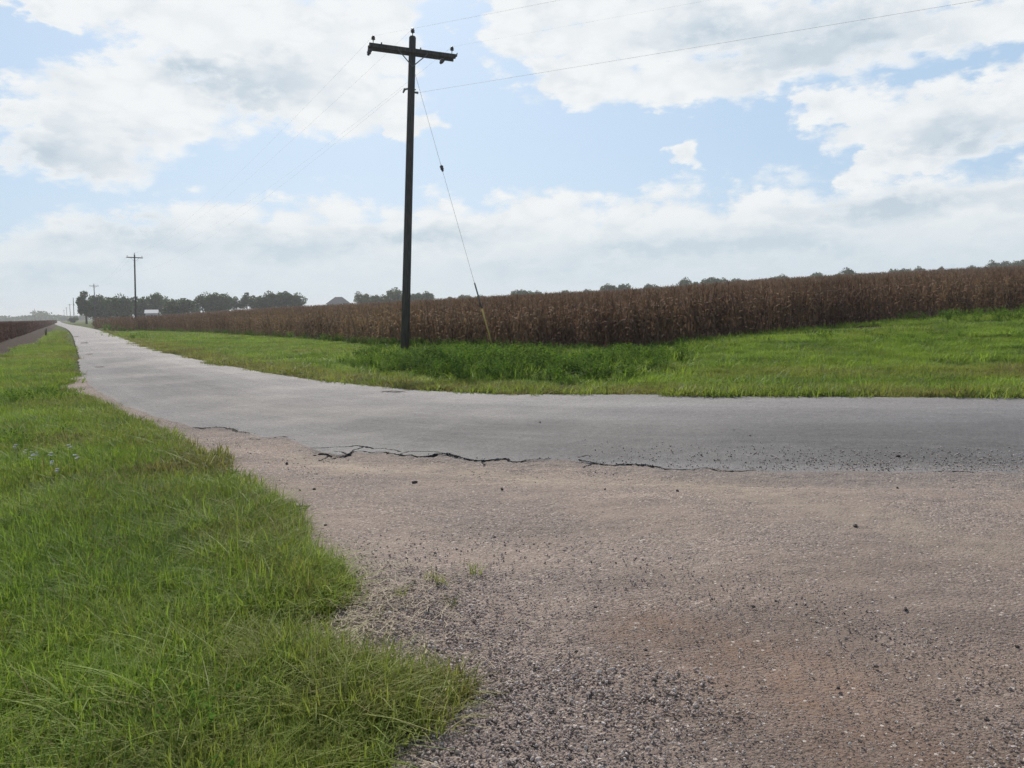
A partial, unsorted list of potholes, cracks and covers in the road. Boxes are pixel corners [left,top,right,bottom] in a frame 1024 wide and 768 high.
crack [313,445,551,467]
crack [577,455,756,472]
crack [193,427,286,440]
